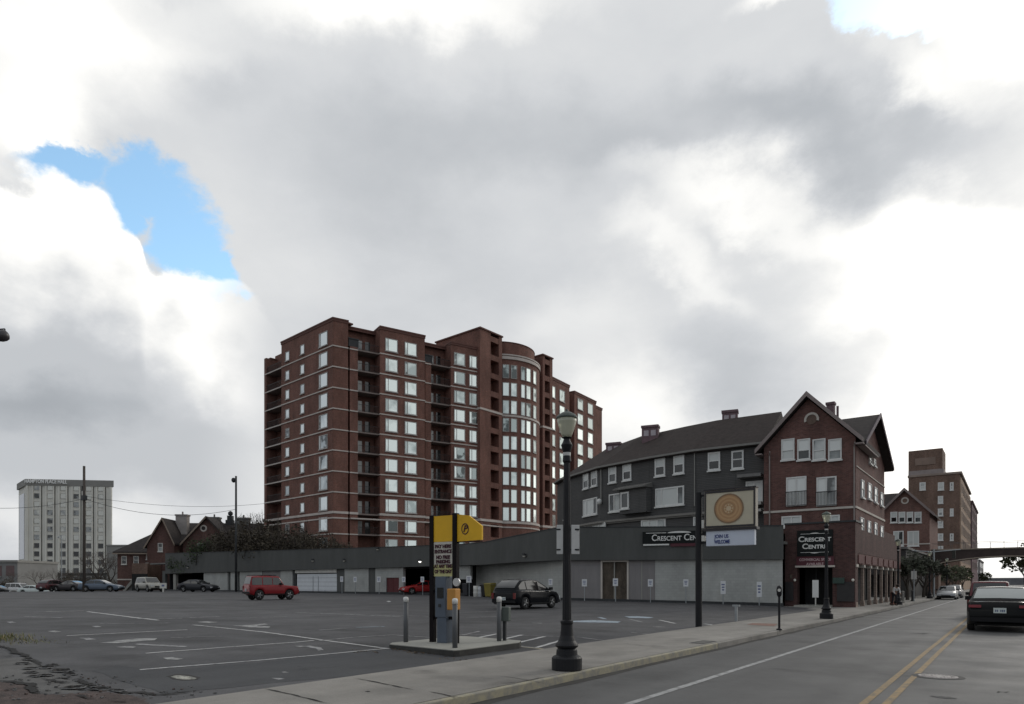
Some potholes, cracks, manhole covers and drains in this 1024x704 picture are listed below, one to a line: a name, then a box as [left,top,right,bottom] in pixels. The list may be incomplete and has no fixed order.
crack [0,646,184,702]
